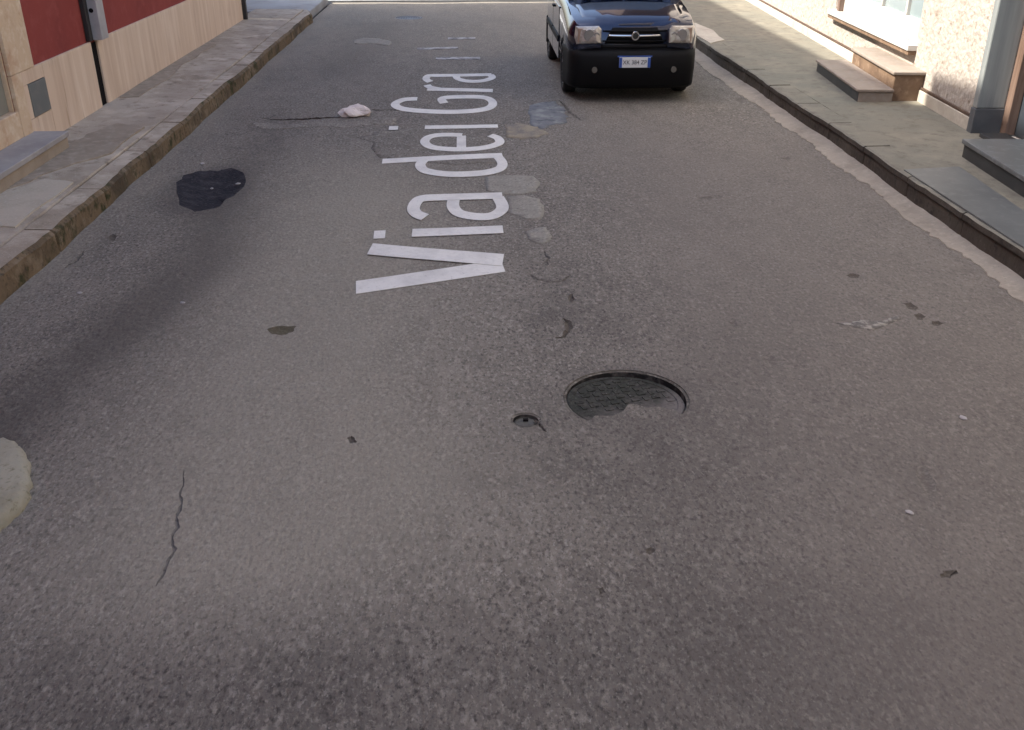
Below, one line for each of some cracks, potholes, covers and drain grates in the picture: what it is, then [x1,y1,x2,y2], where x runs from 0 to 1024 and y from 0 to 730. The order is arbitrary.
utility cover [511,413,541,427]
crack [156,471,184,586]
manhole cover [563,370,690,421]
